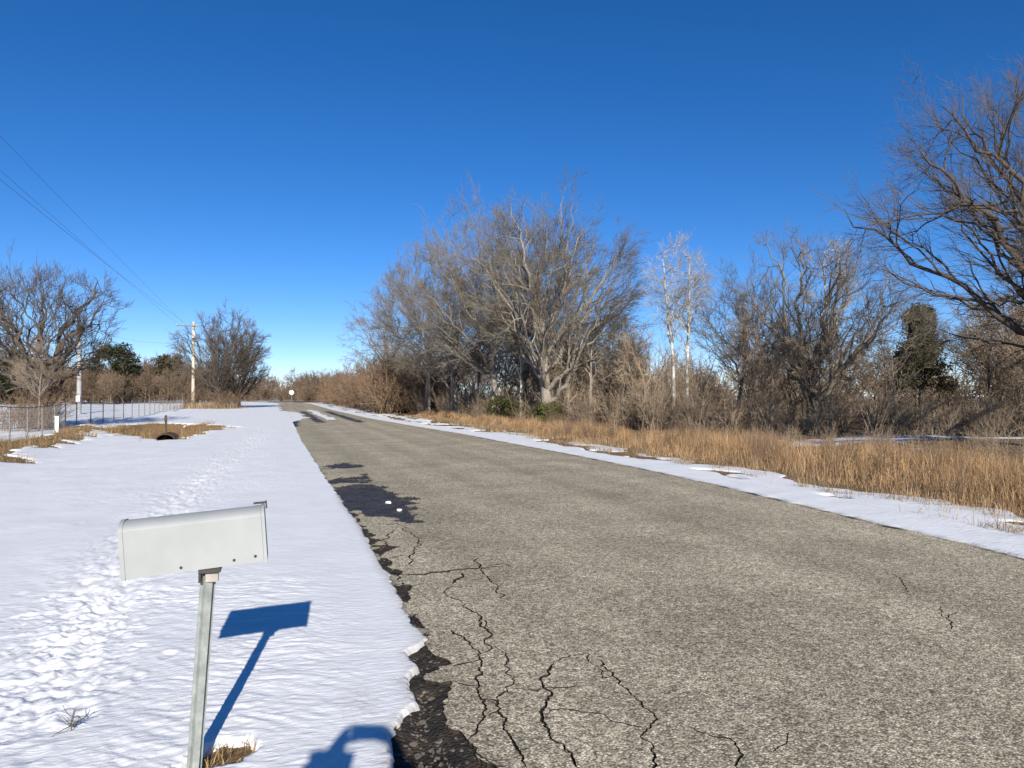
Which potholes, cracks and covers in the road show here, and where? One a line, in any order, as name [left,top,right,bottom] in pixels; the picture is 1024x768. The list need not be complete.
crack [379,523,658,768]
crack [689,726,745,768]
